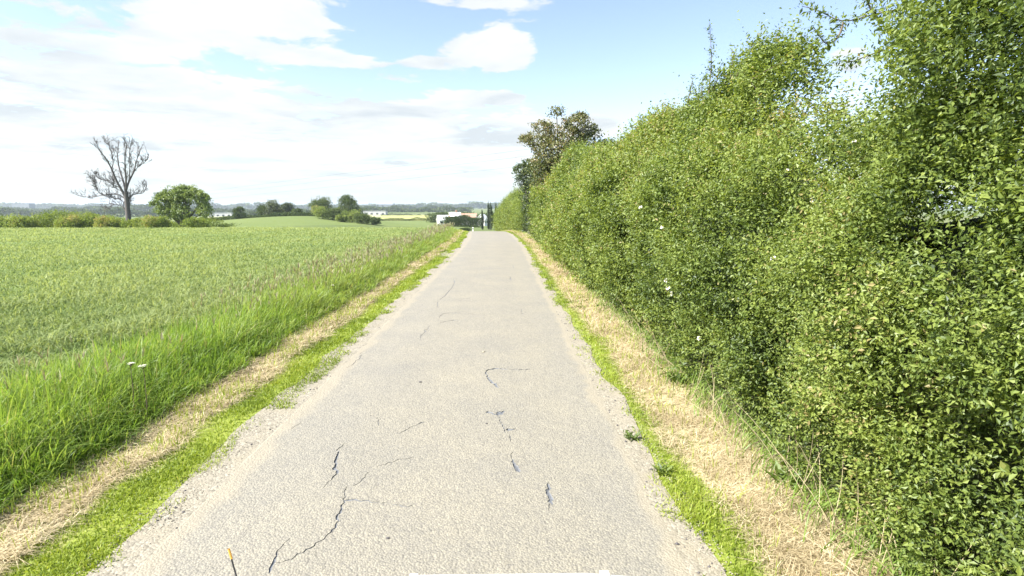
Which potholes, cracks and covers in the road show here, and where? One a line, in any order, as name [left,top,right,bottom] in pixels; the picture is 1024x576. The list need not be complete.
crack [486,411,521,472]
crack [269,449,410,573]
crack [545,483,554,510]
crack [485,368,529,388]
